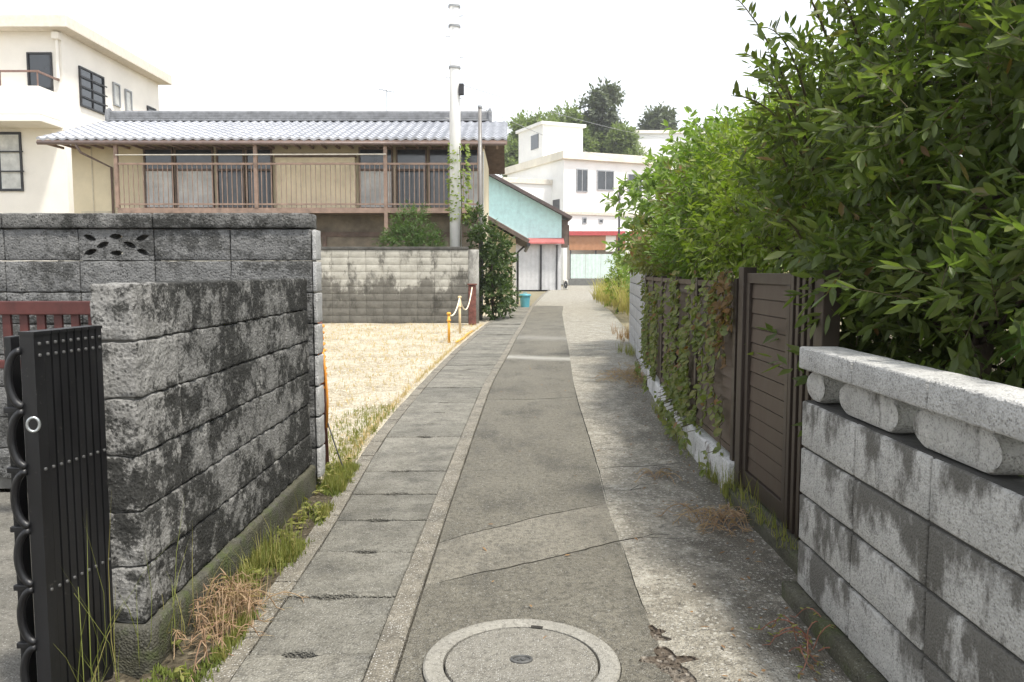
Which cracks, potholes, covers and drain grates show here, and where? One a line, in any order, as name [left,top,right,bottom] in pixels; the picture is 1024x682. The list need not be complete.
pothole [638,646,699,682]
pothole [648,625,671,641]
crack [439,505,670,618]
manhole cover [423,619,621,682]
